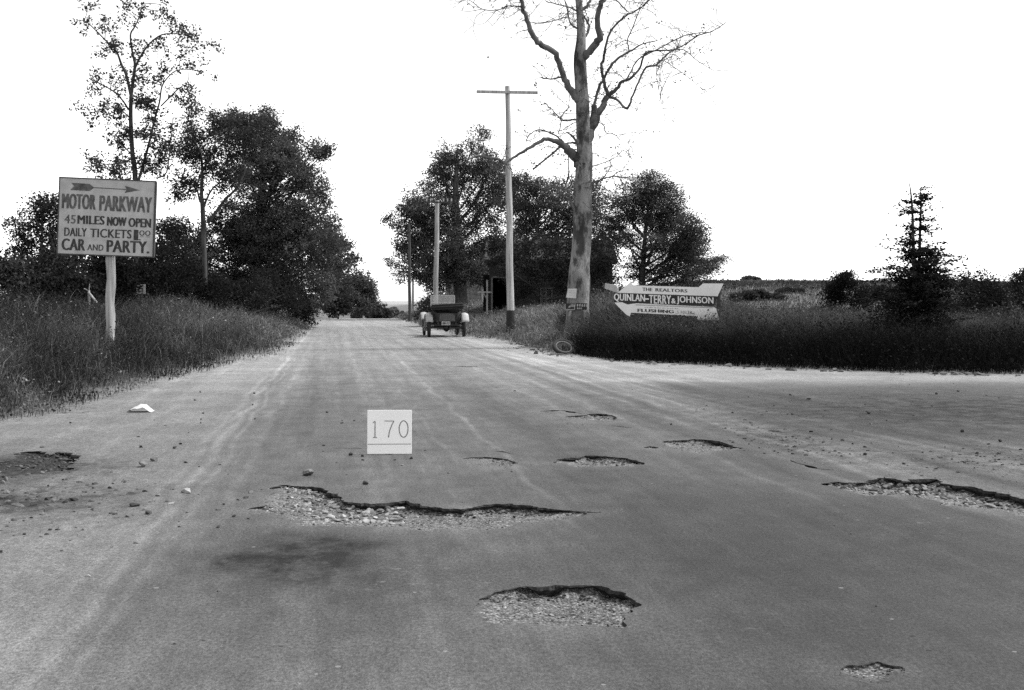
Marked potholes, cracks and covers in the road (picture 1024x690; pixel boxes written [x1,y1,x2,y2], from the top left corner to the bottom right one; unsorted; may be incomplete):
pothole [553,456,645,467]
pothole [839,661,905,684]
pothole [470,585,642,630]
pothole [246,485,600,531]
pothole [822,477,1024,517]
pothole [662,439,742,453]
pothole [564,414,617,422]
pothole [463,457,517,469]
pothole [0,451,81,472]
